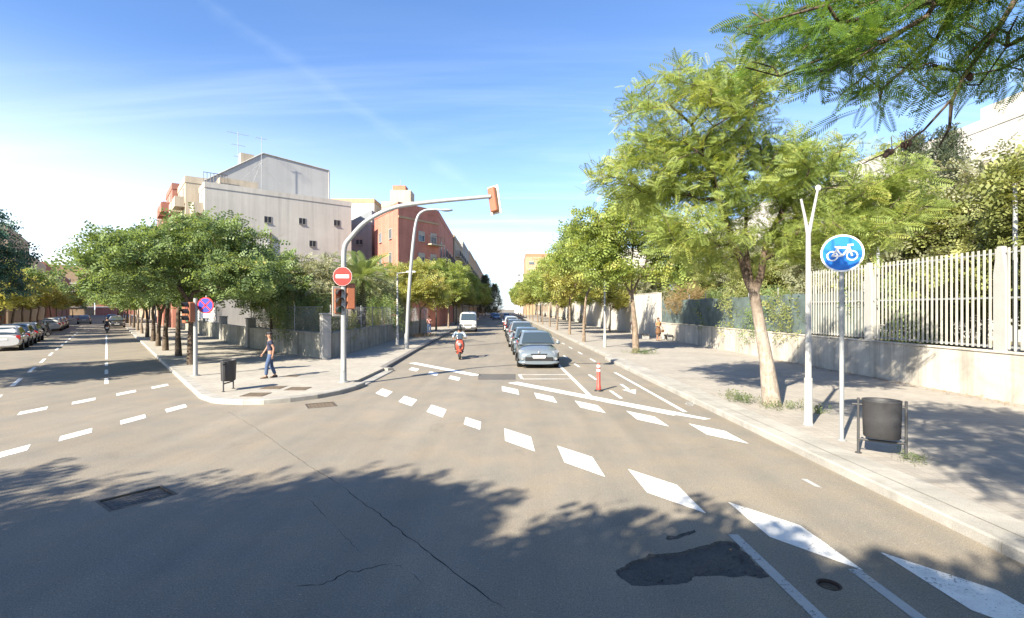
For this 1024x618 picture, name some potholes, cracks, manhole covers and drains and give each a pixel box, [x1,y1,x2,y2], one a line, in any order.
manhole cover [816,578,843,591]
crack [231,413,502,607]
